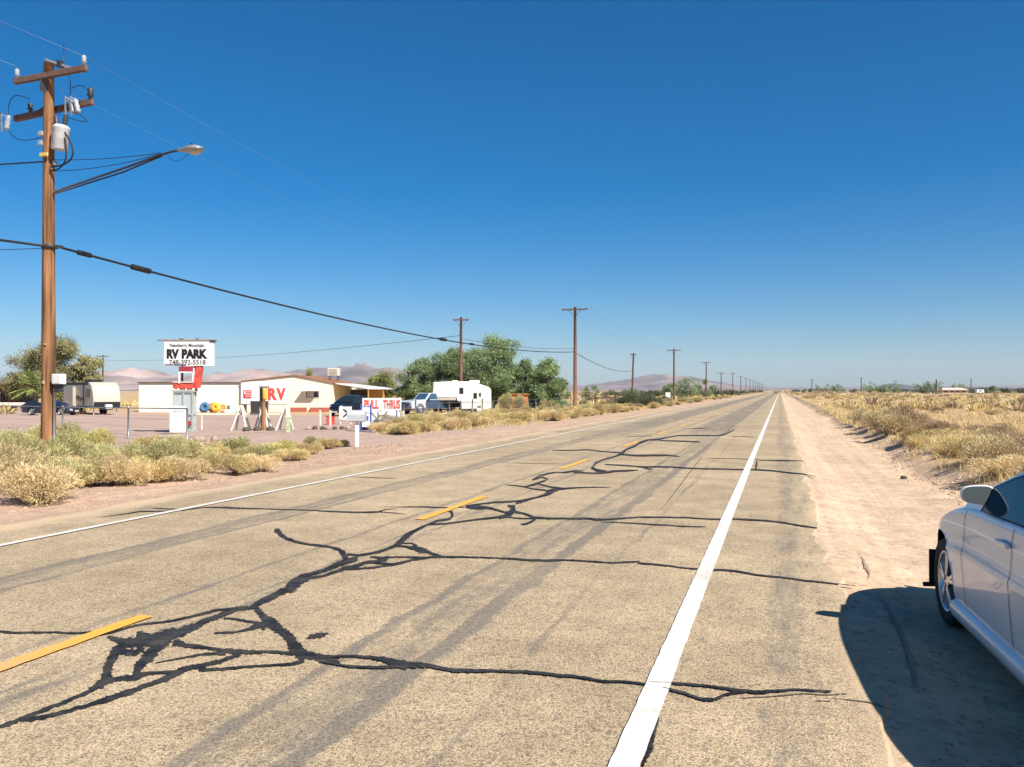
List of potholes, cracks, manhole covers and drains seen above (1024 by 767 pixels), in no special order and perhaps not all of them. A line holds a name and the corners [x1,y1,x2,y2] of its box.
crack [0,428,921,728]
